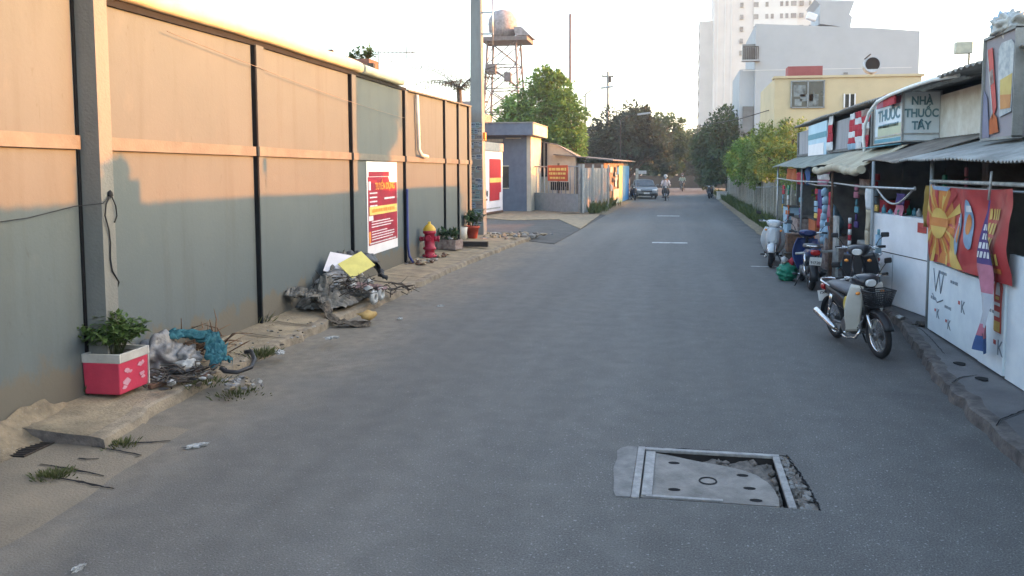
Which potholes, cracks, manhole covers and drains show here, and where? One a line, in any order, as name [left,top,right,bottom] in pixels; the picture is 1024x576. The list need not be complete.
manhole cover [613,446,821,511]
drain grate [10,442,55,457]
